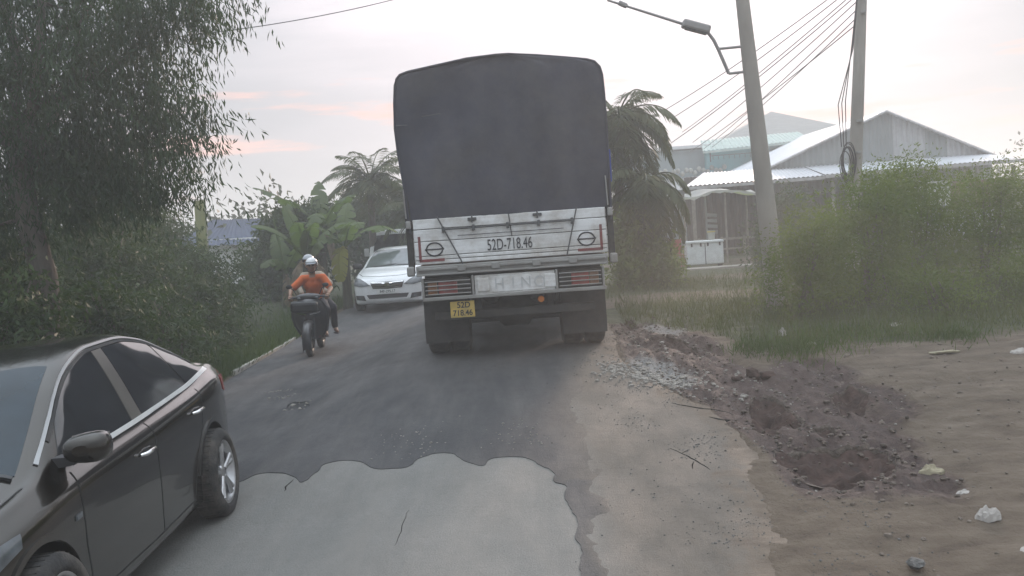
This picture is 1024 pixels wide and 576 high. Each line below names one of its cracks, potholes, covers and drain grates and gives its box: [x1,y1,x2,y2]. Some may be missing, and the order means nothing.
pothole [773,443,901,491]
pothole [748,394,806,438]
pothole [287,401,310,410]
pothole [811,424,837,438]
pothole [831,384,869,417]
